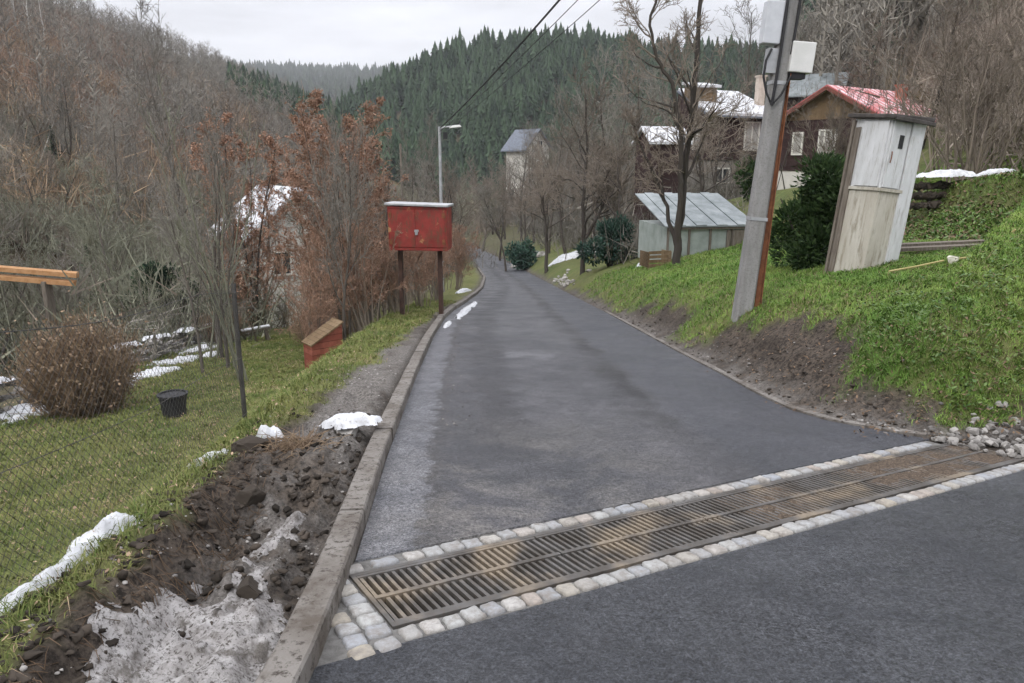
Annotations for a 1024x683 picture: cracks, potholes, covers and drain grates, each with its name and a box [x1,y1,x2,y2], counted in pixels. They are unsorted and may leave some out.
drain grate [349,443,1024,630]
